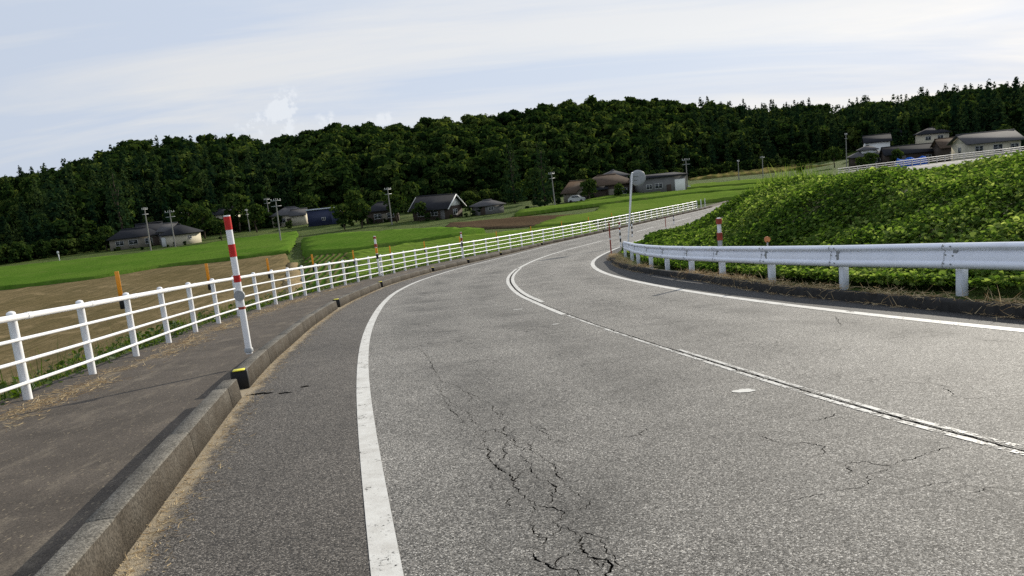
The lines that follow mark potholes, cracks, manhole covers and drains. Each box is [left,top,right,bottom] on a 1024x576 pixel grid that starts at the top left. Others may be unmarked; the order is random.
crack [758,408,990,502]
crack [421,350,647,576]
